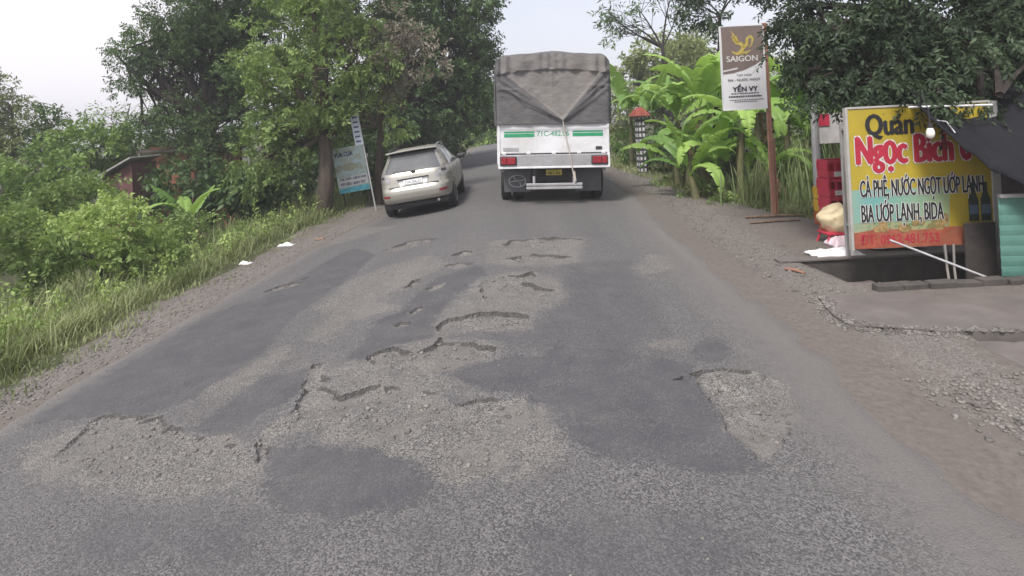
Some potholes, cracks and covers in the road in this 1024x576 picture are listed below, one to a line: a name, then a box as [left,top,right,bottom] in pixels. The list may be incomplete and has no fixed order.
pothole [506,253,573,262]
pothole [479,271,558,299]
pothole [366,337,497,376]
pothole [52,412,250,488]
pothole [253,363,531,487]
pothole [383,238,438,252]
pothole [495,237,584,249]
pothole [436,311,530,334]
pothole [689,368,802,461]
pothole [263,281,305,293]
